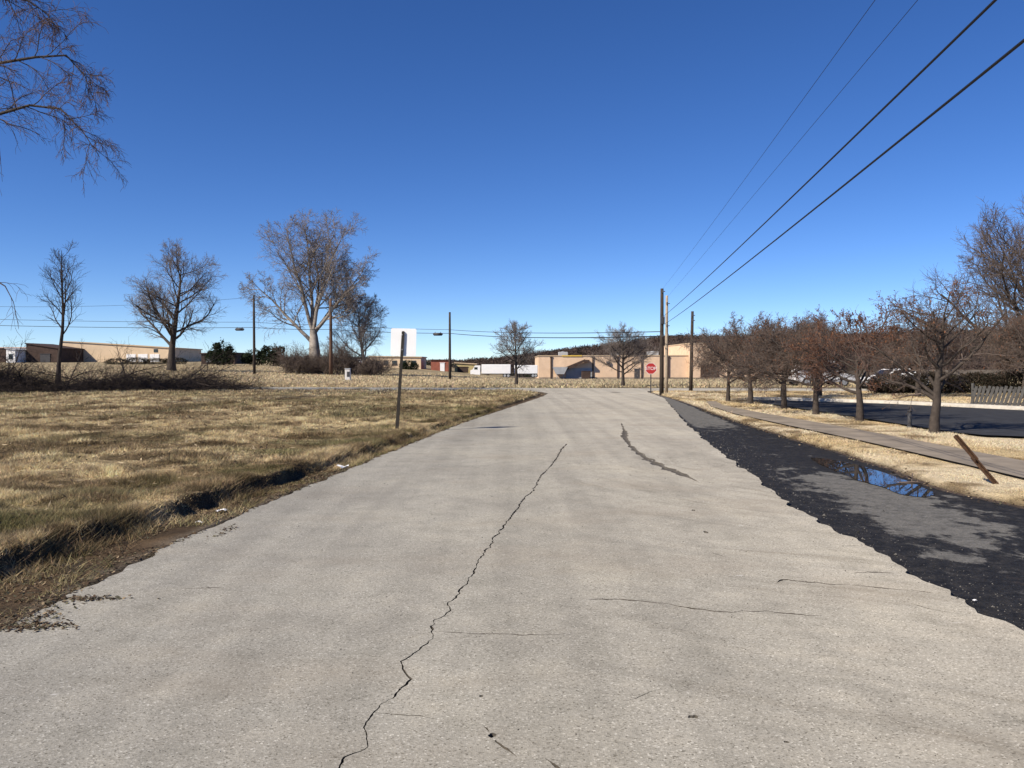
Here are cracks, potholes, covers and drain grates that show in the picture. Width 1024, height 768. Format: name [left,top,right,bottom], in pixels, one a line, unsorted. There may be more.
crack [620,423,697,481]
crack [338,444,567,768]
crack [589,599,820,616]
crack [778,572,956,614]
